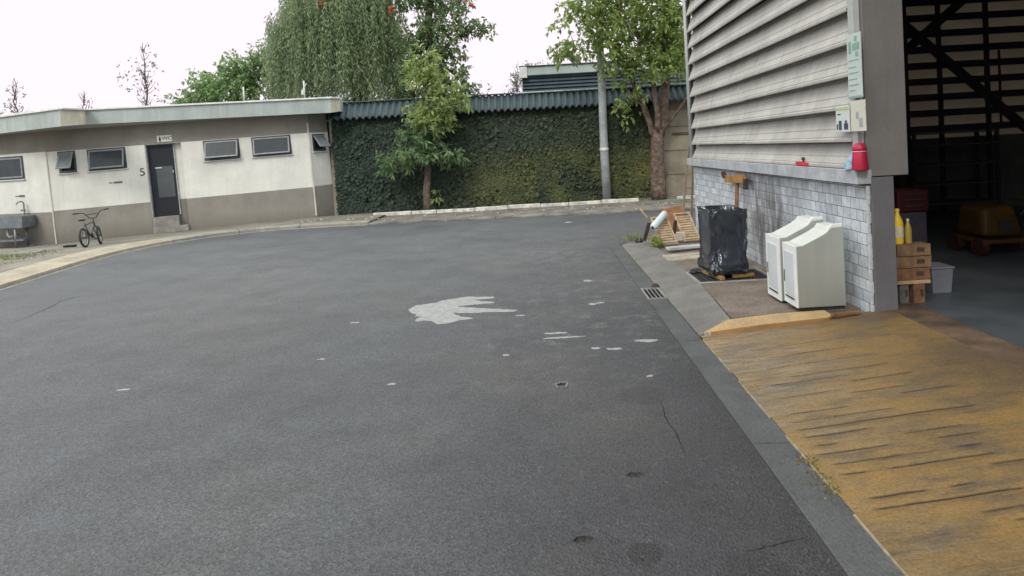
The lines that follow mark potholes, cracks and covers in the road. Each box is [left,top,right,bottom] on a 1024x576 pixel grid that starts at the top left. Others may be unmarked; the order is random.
crack [746,536,808,552]
pothole [573,535,594,545]
crack [661,401,686,457]
drain grate [640,287,667,300]
